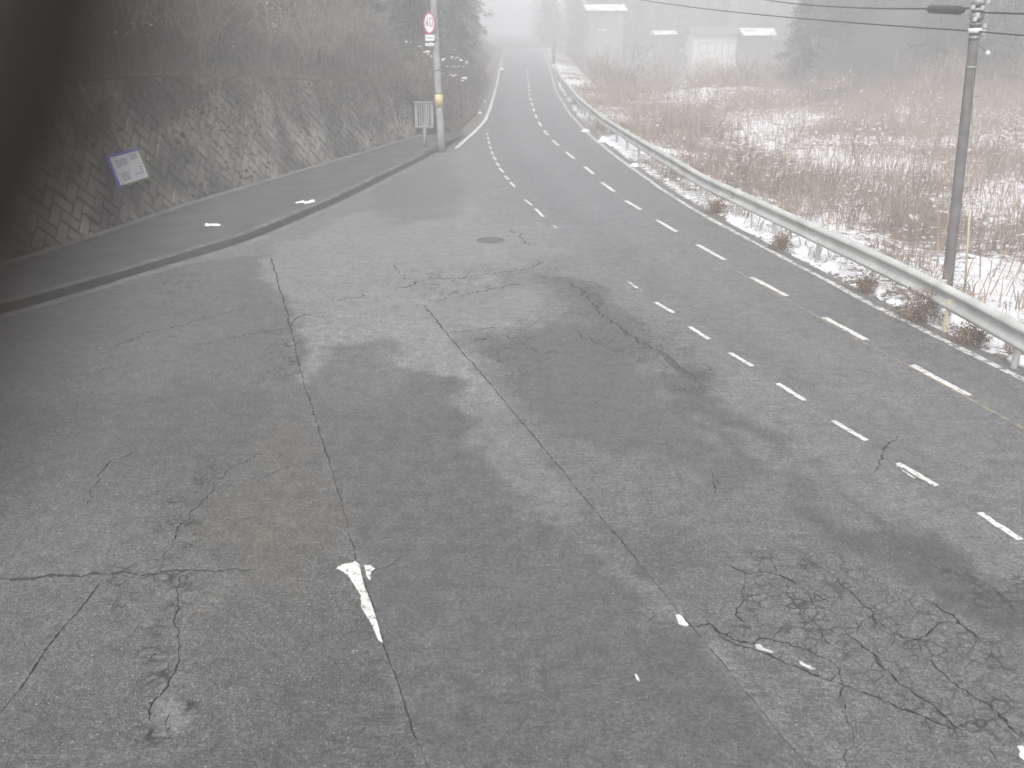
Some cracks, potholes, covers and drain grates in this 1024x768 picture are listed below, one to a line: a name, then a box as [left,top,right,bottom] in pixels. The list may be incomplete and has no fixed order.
crack [0,453,314,732]
crack [874,436,898,473]
crack [637,551,1024,768]
crack [570,281,663,352]
